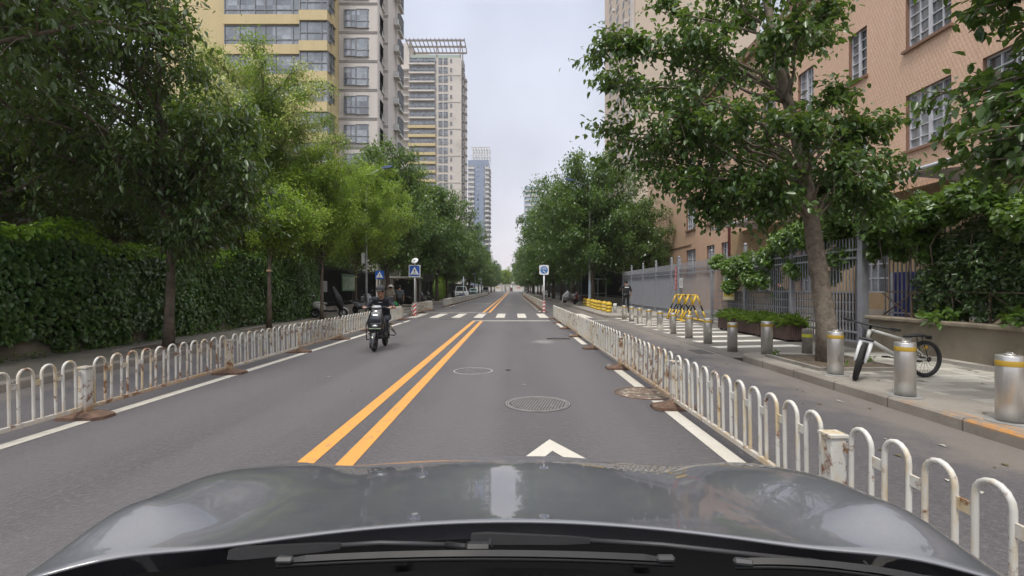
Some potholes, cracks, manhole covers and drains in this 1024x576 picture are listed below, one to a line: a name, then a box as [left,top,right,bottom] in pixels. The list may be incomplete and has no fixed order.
manhole cover [614,387,670,400]
manhole cover [505,396,571,412]
